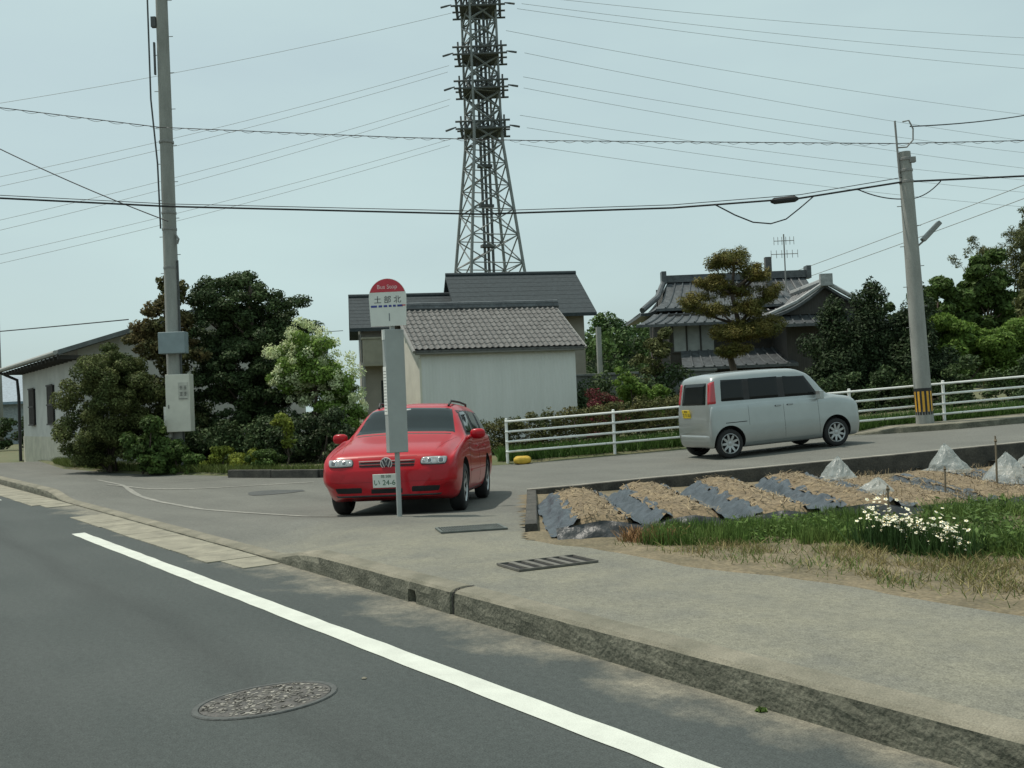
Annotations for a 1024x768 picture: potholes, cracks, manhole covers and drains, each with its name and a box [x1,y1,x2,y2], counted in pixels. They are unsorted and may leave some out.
manhole cover [191,681,338,720]
drain grate [496,554,599,572]
